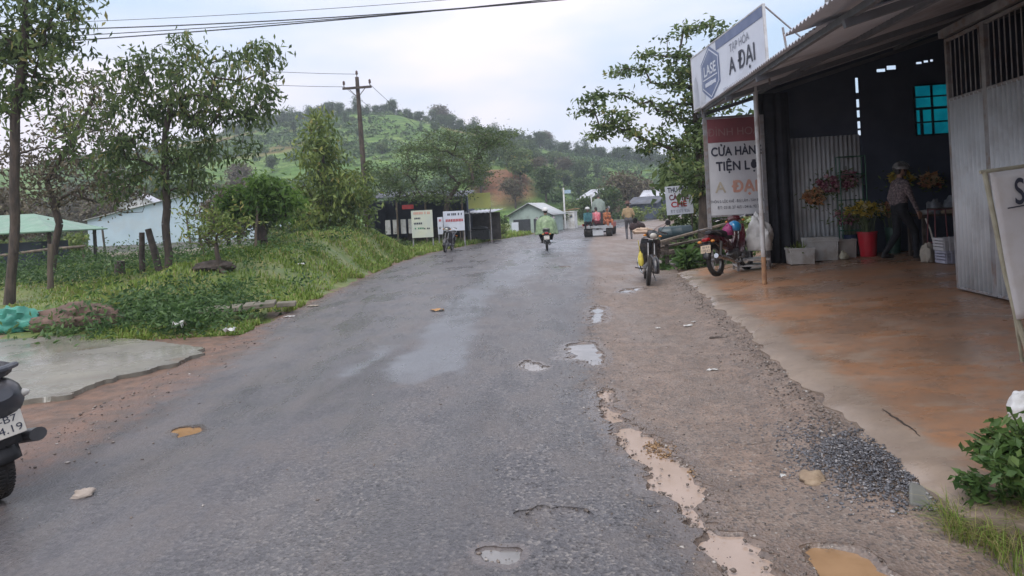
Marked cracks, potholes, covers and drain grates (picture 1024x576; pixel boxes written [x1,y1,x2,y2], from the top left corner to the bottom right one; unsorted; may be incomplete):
pothole [171,426,203,438]
pothole [474,546,523,565]
crack [883,409,920,436]
pothole [519,360,551,371]
pothole [564,342,606,366]
